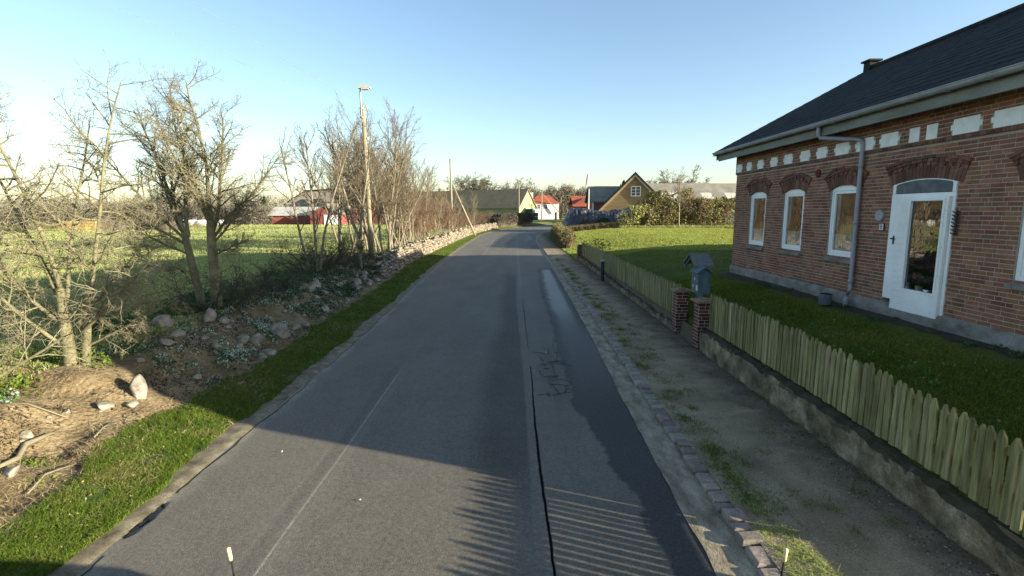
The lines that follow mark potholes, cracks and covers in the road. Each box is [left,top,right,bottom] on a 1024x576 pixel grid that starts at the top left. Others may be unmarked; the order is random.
crack [536,343,570,396]
